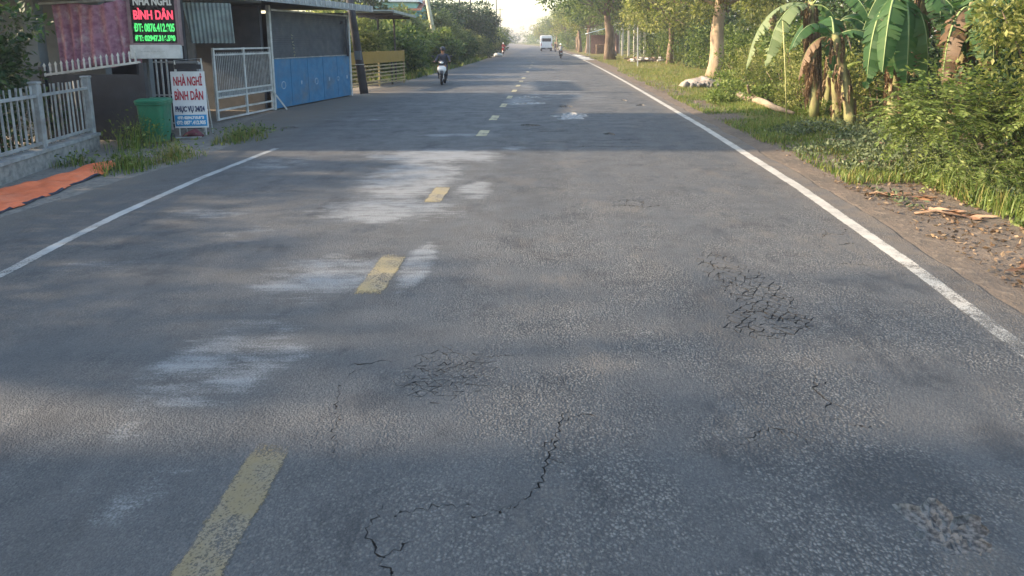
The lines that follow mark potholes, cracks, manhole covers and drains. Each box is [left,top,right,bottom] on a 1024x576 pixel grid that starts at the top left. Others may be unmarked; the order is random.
crack [365,411,596,576]
pothole [892,497,992,556]
crack [331,360,391,456]
crack [697,253,814,339]
crack [393,345,523,404]
